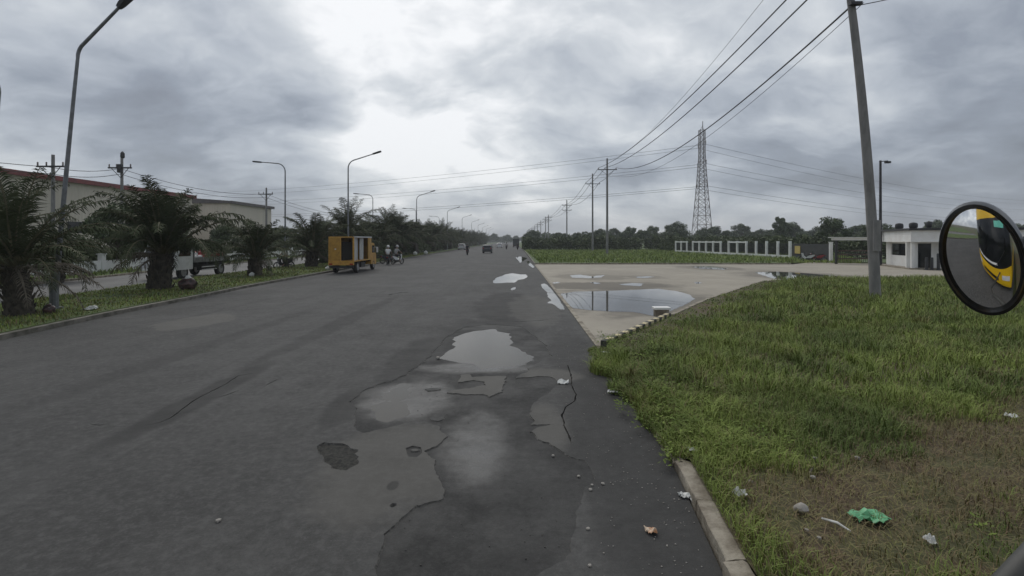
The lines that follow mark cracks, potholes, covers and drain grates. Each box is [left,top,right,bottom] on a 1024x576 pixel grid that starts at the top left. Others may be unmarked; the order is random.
crack [561,365,577,442]
crack [150,374,246,425]
pothole [317,442,359,470]
